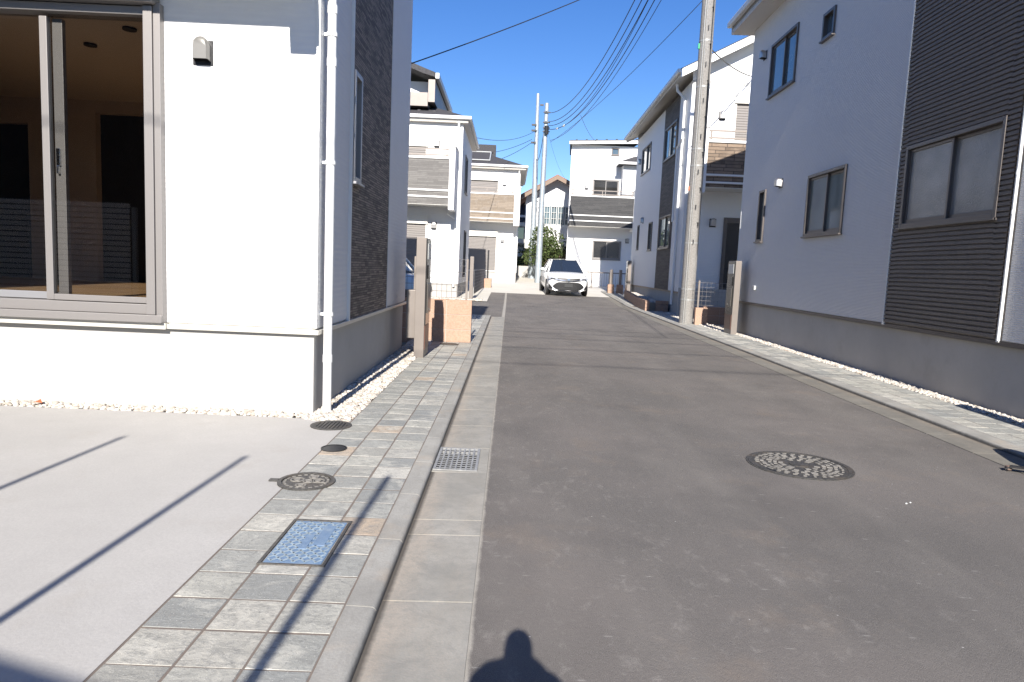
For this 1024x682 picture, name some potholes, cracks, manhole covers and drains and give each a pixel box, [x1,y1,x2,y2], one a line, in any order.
manhole cover [746,451,855,481]
utility cover [321,444,347,452]
utility cover [268,472,335,491]
drain grate [432,447,489,473]
